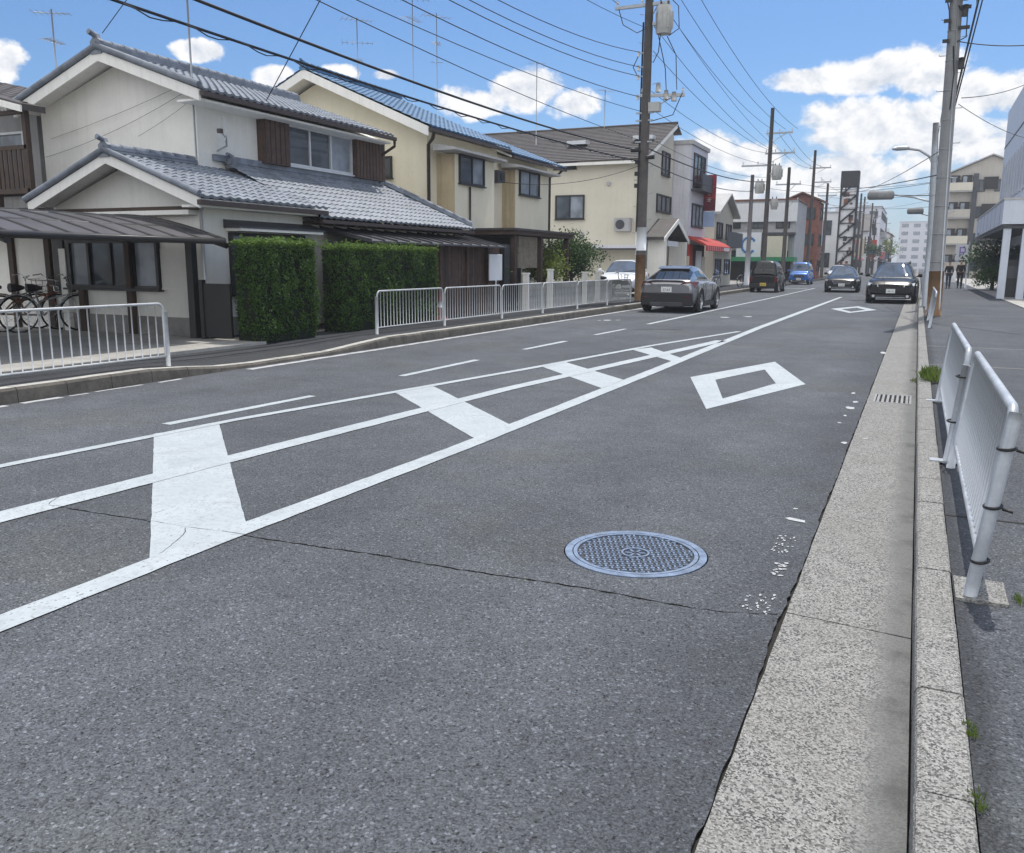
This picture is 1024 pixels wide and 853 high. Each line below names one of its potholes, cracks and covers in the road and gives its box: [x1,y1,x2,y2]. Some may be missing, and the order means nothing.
manhole cover [565,531,707,578]
drain grate [873,393,912,404]
crack [49,496,777,615]
